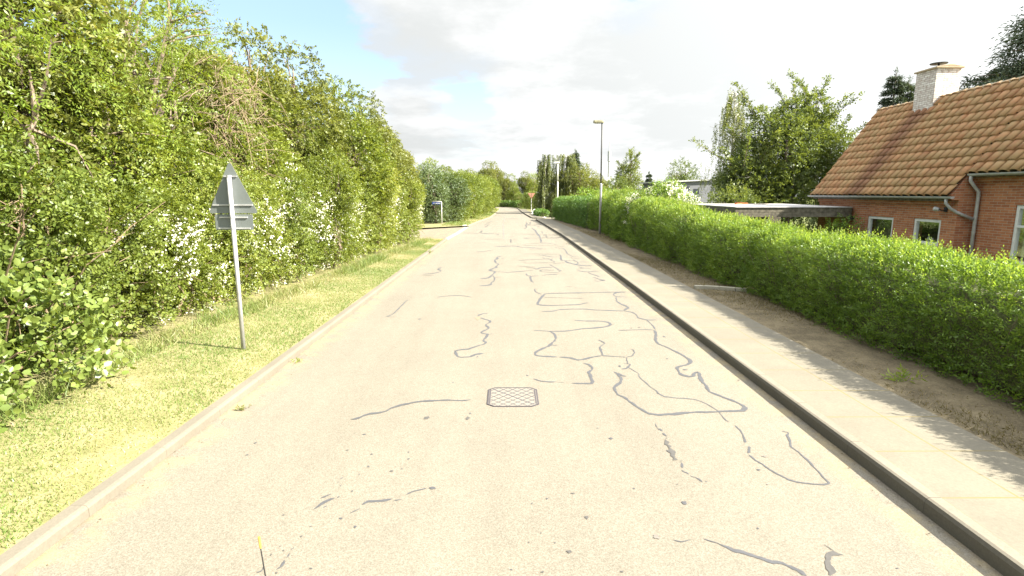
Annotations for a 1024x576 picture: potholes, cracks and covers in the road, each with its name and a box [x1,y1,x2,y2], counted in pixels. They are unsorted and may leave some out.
crack [314,477,343,509]
crack [441,216,830,485]
crack [353,399,470,420]
manhole cover [487,387,539,407]
crack [825,545,843,575]
crack [351,488,426,513]
crack [675,539,807,576]
